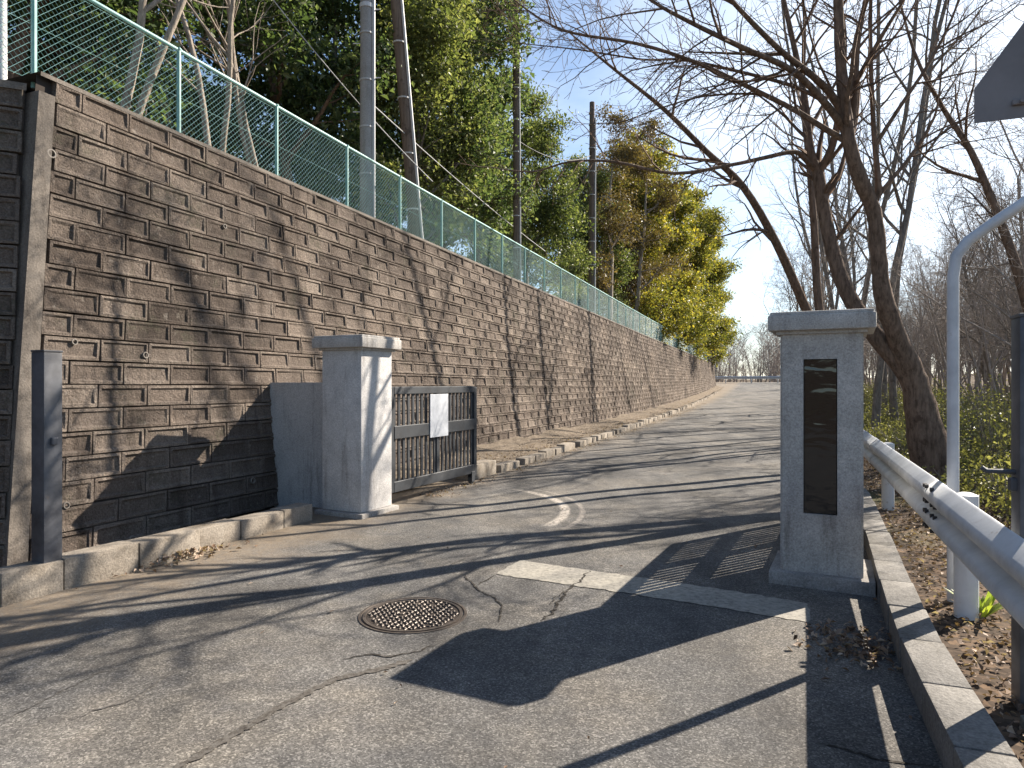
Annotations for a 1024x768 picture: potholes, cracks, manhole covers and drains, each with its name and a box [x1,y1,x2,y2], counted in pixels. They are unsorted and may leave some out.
manhole cover [358,597,467,634]
crack [345,645,434,659]
crack [541,571,591,620]
crack [450,553,503,621]
